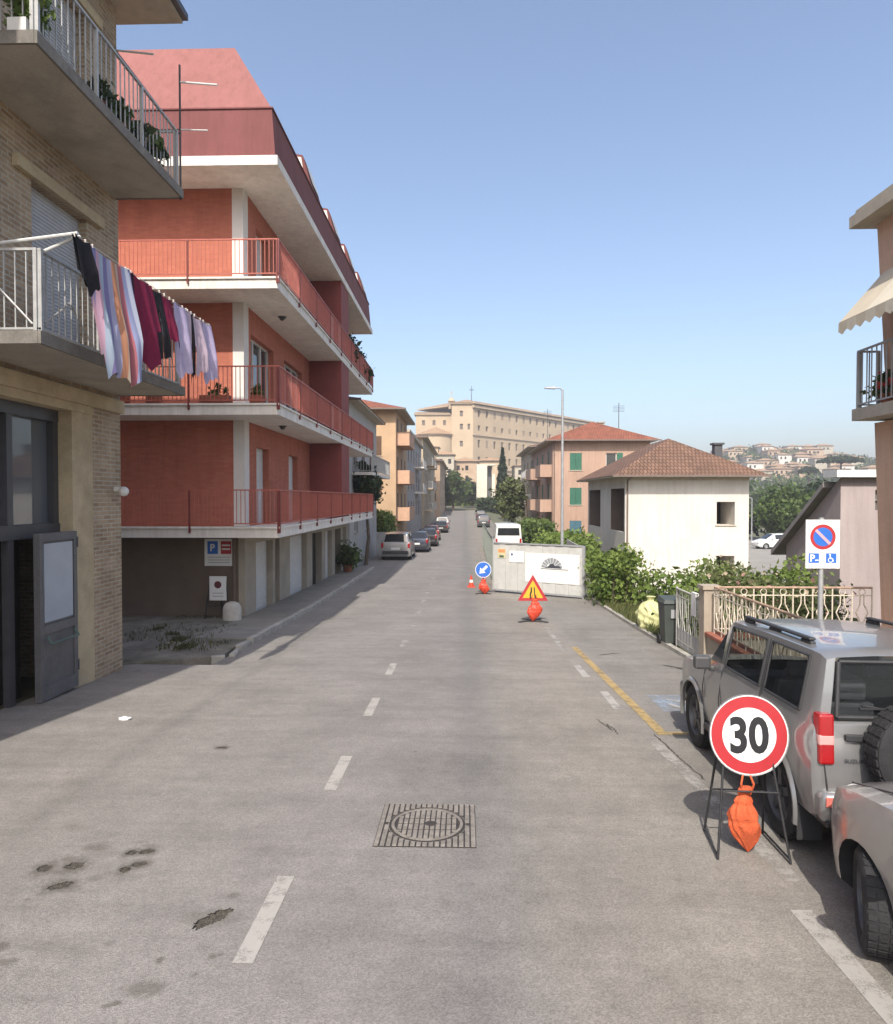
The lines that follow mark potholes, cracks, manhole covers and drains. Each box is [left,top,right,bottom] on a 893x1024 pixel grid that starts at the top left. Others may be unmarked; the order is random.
manhole cover [373,803,476,848]
pothole [47,881,75,891]
pothole [192,908,234,930]
crack [654,734,705,780]
